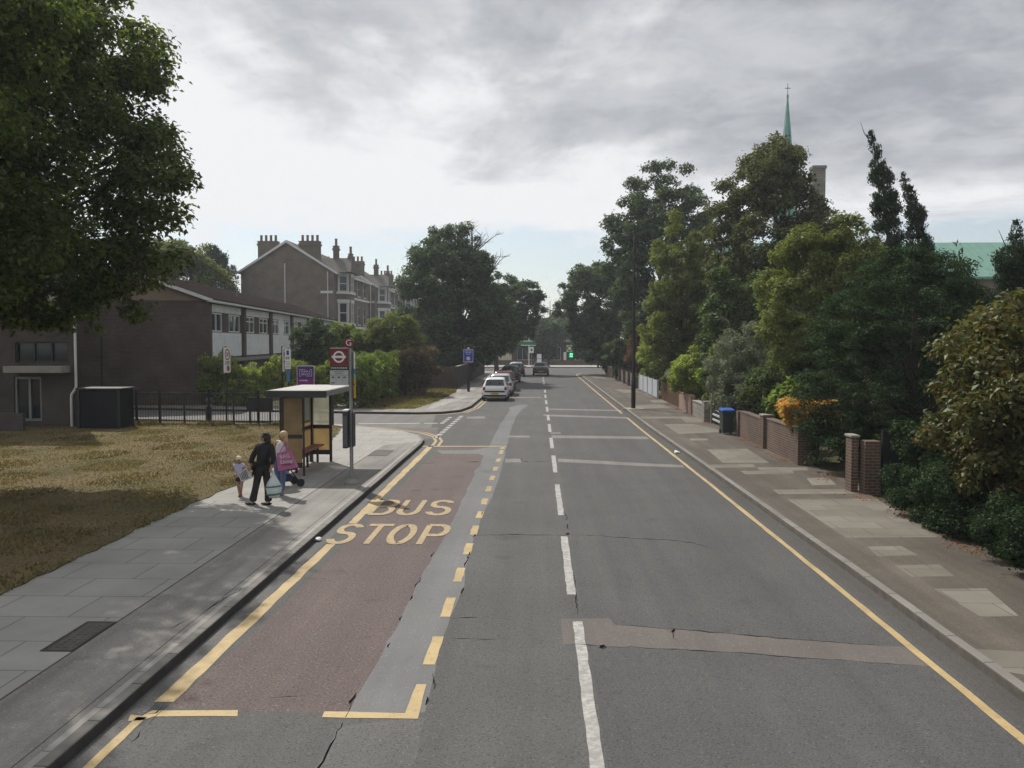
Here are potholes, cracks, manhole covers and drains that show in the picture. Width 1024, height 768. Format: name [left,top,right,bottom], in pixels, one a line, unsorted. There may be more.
crack [572,624,917,666]
manhole cover [40,621,116,652]
crack [317,692,357,768]
